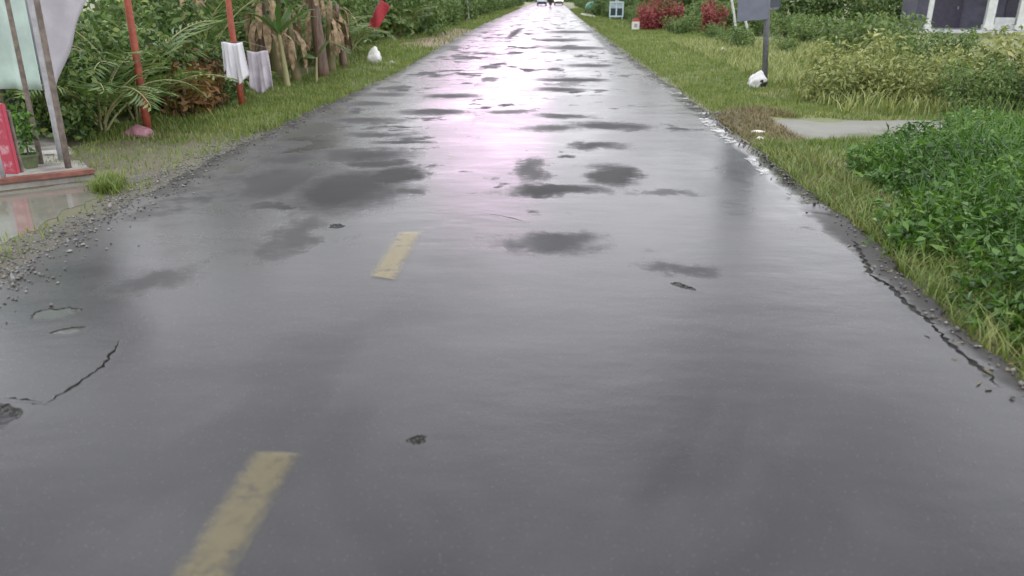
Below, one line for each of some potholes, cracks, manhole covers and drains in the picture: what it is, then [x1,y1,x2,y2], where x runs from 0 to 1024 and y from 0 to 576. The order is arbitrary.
pothole [0,398,36,435]
crack [845,238,1010,389]
pothole [323,222,352,231]
crack [0,340,129,406]
pothole [40,323,95,338]
pothole [663,280,704,293]
pothole [21,304,92,322]
pothole [396,430,436,450]
